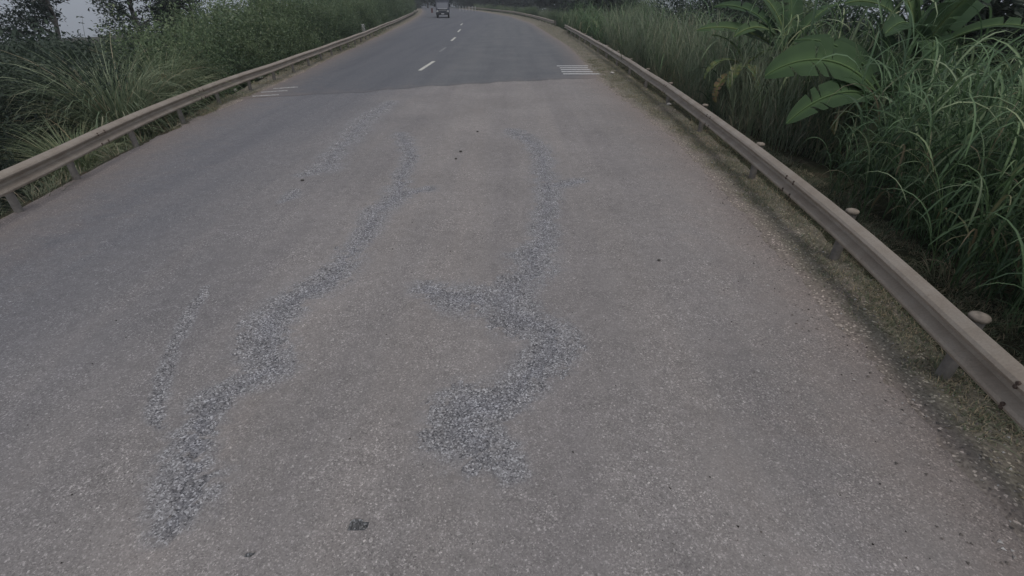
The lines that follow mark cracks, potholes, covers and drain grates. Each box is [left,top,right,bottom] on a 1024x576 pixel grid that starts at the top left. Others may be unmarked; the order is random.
pothole [347,519,369,531]
